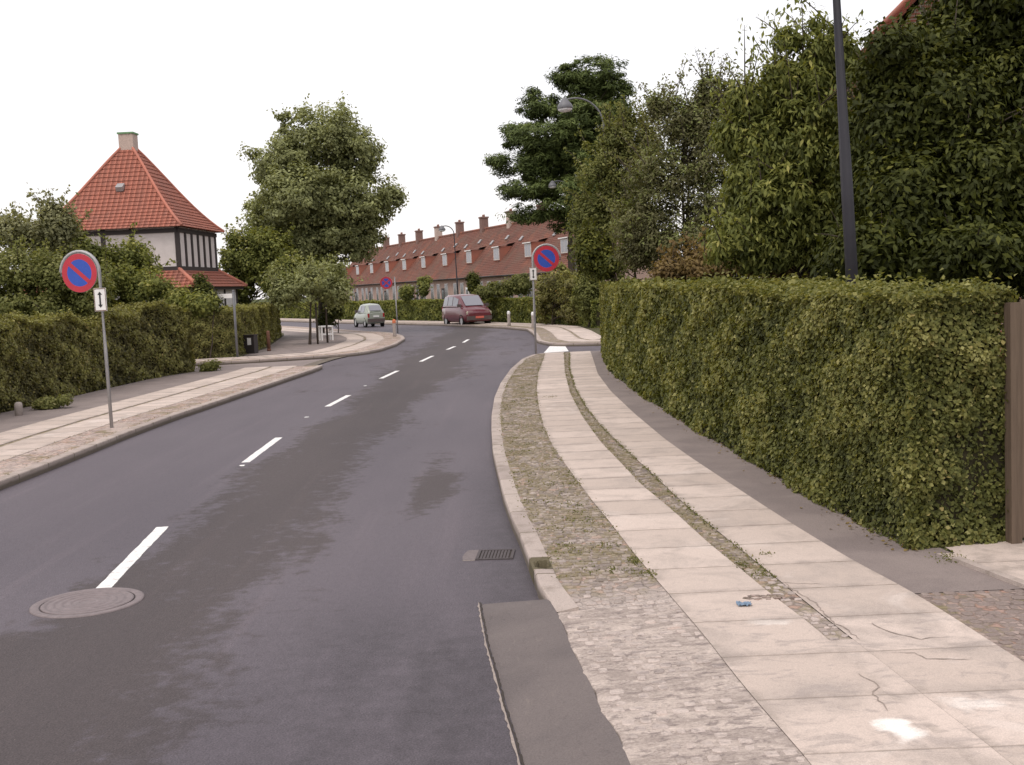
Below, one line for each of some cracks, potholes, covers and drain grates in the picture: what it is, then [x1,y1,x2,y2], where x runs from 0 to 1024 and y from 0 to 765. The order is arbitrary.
manhole cover [29,587,145,619]
crack [766,582,951,659]
drain grate [463,549,515,561]
